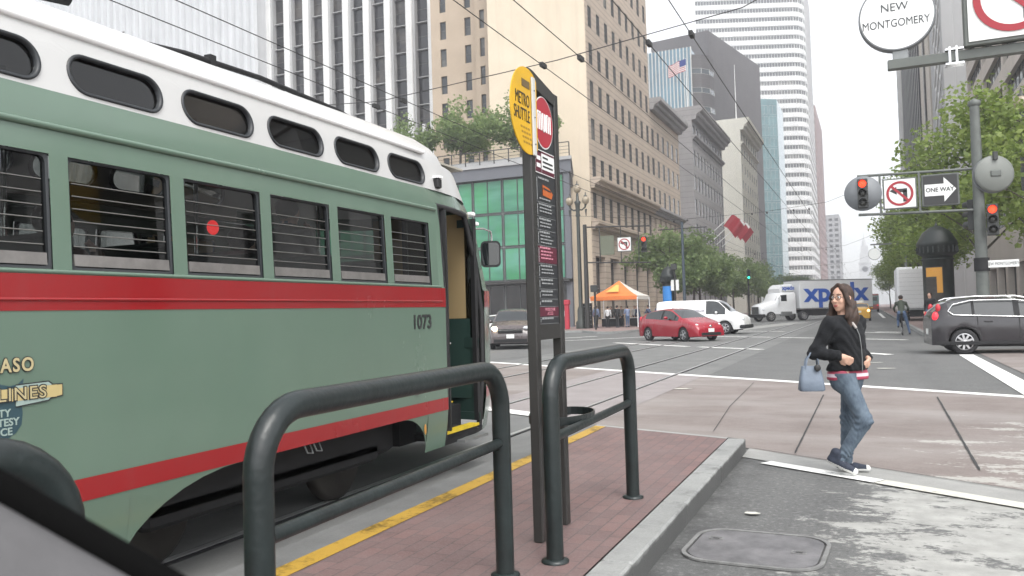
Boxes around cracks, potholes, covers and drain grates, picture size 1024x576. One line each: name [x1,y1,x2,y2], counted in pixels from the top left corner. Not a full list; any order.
manhole cover [681,528,831,572]
